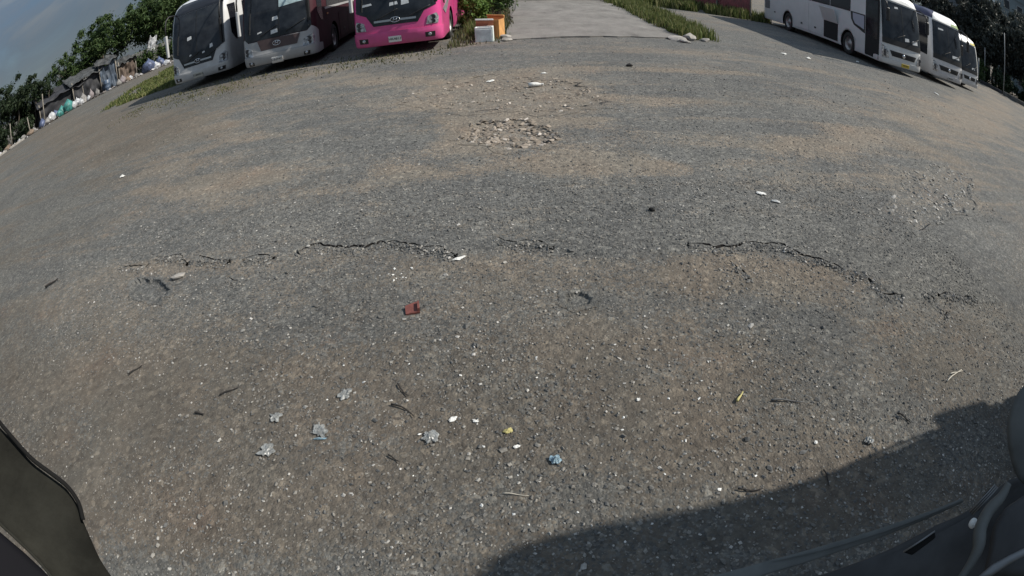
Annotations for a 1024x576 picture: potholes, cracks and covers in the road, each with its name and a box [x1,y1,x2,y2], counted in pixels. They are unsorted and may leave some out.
crack [296,238,460,258]
pothole [448,116,573,155]
pothole [556,287,602,312]
crack [688,239,975,315]
crack [121,251,278,284]
pothole [125,275,176,306]
crack [494,235,555,250]
